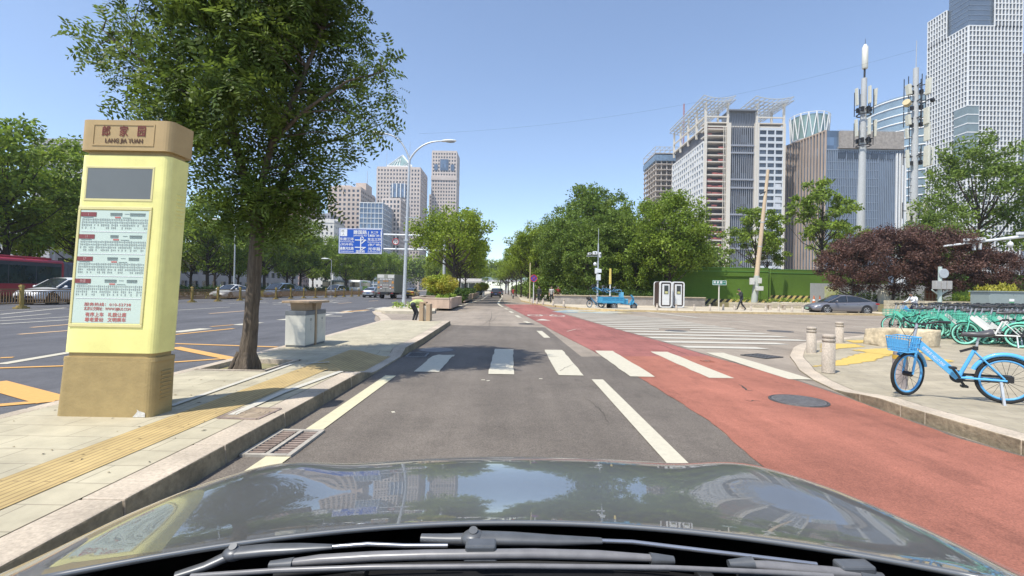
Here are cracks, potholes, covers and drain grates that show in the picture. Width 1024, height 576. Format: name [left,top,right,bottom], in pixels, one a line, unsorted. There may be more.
manhole cover [216,407,282,420]
manhole cover [768,394,831,408]
drain grate [239,429,325,458]
